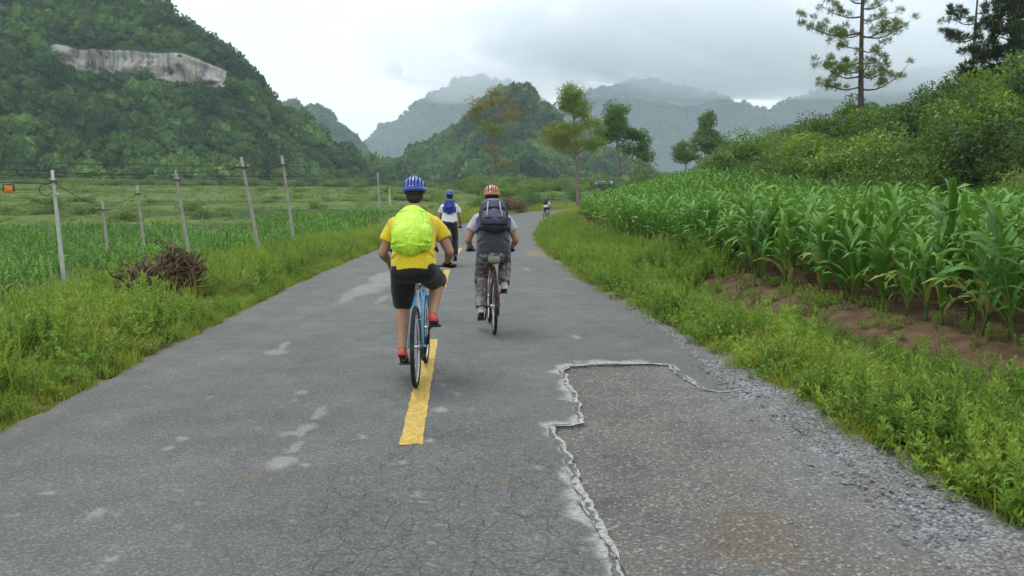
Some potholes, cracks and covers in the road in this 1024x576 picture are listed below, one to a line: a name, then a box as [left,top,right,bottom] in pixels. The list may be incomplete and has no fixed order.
crack [278,362,735,576]
